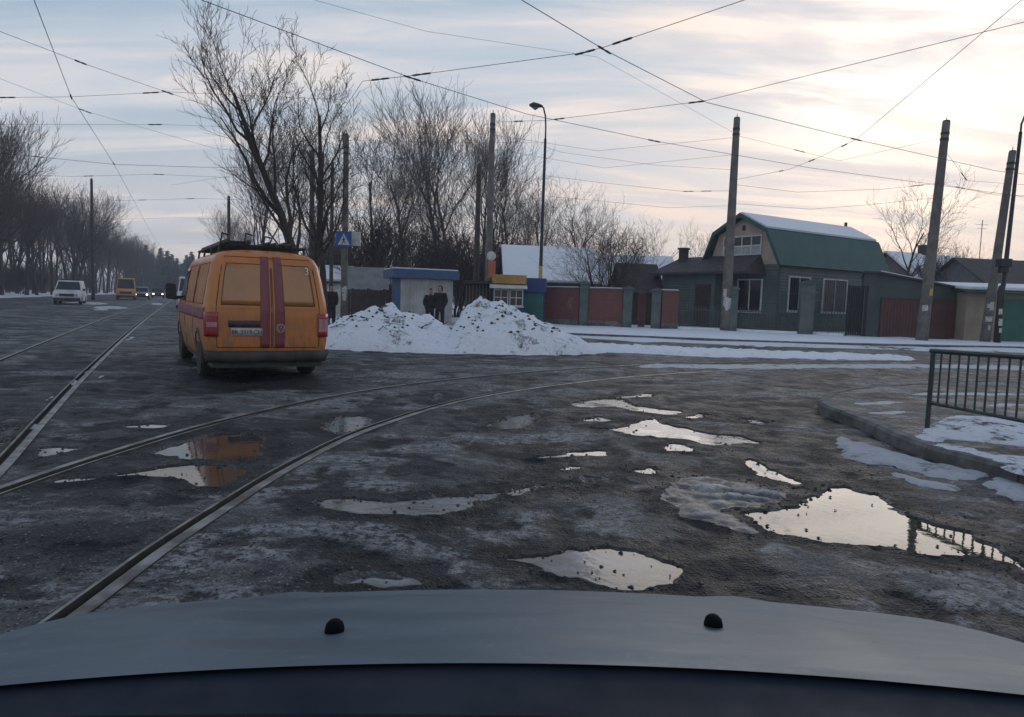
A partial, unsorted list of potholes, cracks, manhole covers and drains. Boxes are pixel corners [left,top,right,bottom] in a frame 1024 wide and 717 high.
pothole [730,483,1024,574]
pothole [318,415,375,436]
pothole [533,449,609,462]
pothole [744,458,808,490]
pothole [142,432,274,463]
pothole [311,566,440,592]
pothole [488,412,538,430]
pothole [590,415,765,447]
pothole [111,461,264,493]
pothole [570,397,684,415]
pothole [649,472,808,536]
pothole [657,440,696,453]
